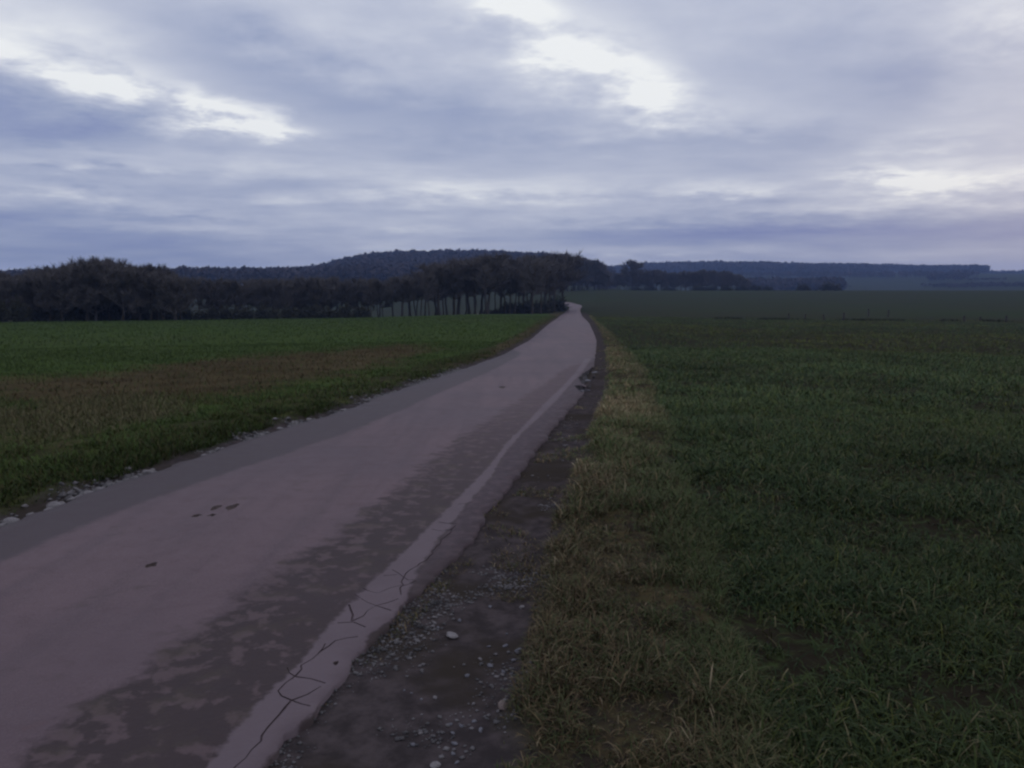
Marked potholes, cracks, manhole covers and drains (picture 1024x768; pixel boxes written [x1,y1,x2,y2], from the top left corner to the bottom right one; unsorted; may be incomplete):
crack [234,522,457,768]
